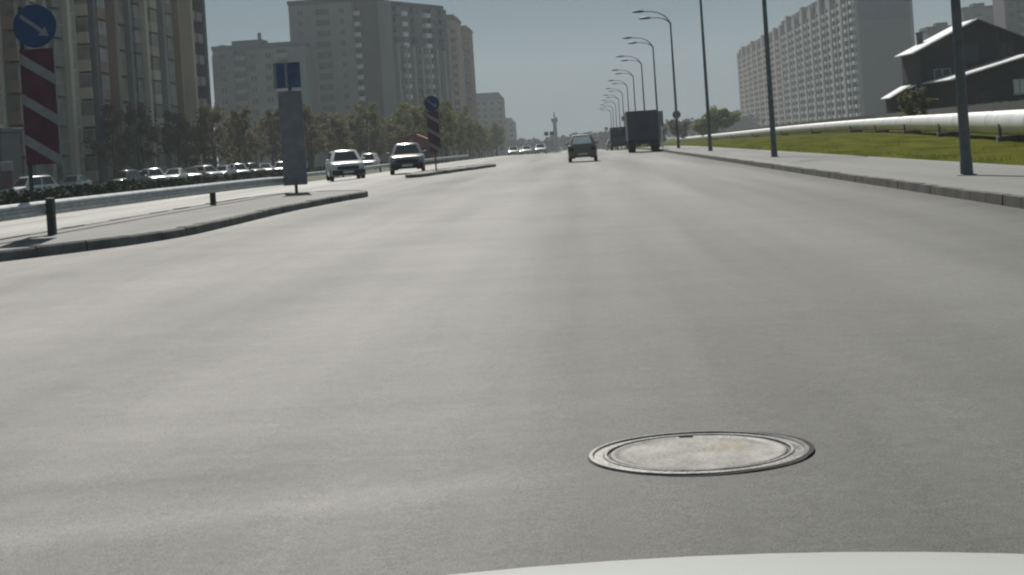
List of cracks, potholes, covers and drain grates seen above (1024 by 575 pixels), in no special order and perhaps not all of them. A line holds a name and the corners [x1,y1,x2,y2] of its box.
manhole cover [588,431,815,477]
